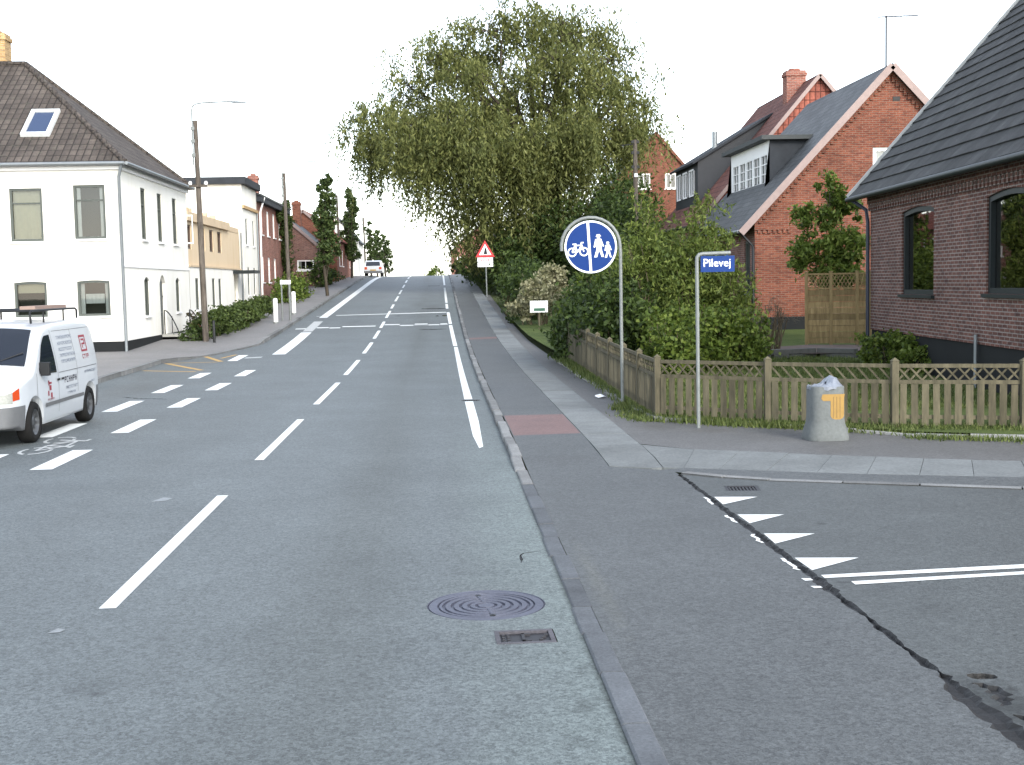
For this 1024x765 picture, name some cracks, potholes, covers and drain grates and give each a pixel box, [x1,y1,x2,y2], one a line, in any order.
manhole cover [427,590,545,620]
crack [972,683,1024,720]
